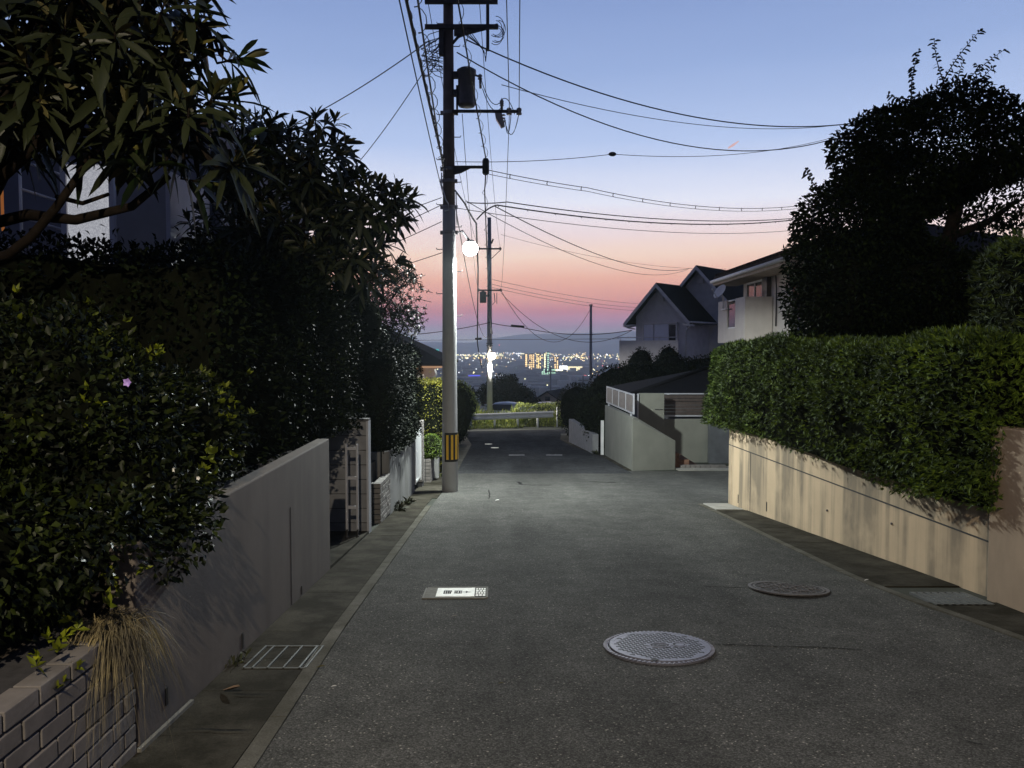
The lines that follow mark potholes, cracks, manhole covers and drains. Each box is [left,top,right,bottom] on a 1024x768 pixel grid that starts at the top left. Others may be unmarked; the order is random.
drain grate [909,592,994,605]
drain grate [242,645,324,670]
manhole cover [422,586,488,599]
manhole cover [603,631,715,666]
manhole cover [748,581,830,596]
